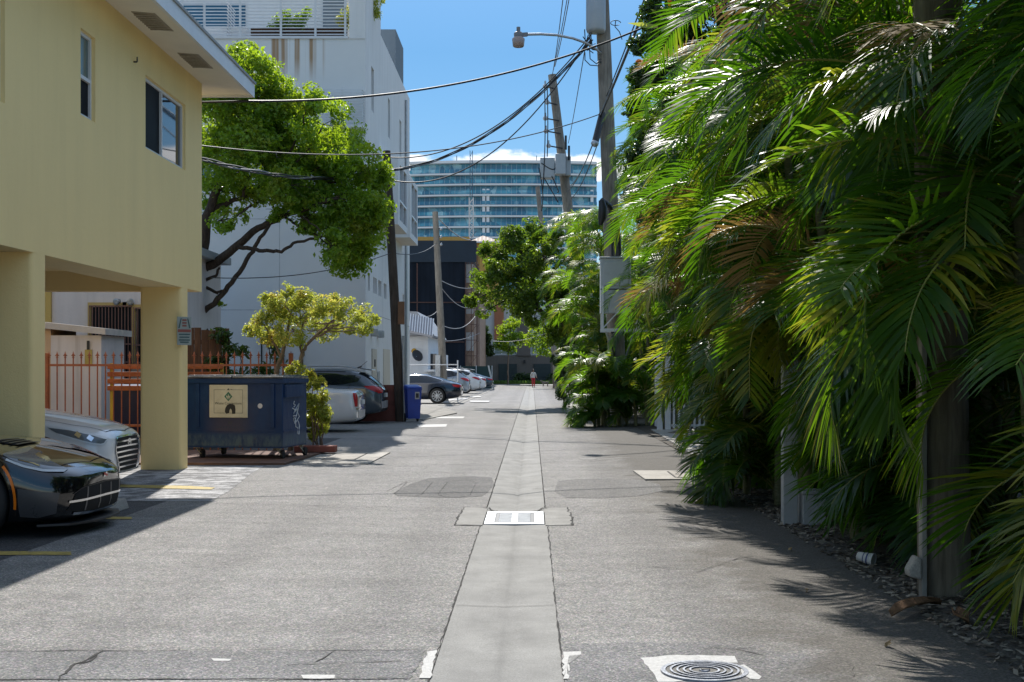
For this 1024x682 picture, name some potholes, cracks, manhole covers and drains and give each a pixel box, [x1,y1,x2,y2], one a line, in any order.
manhole cover [660,660,749,682]
utility cover [633,470,710,481]
drain grate [484,512,544,526]
crack [0,649,411,680]
